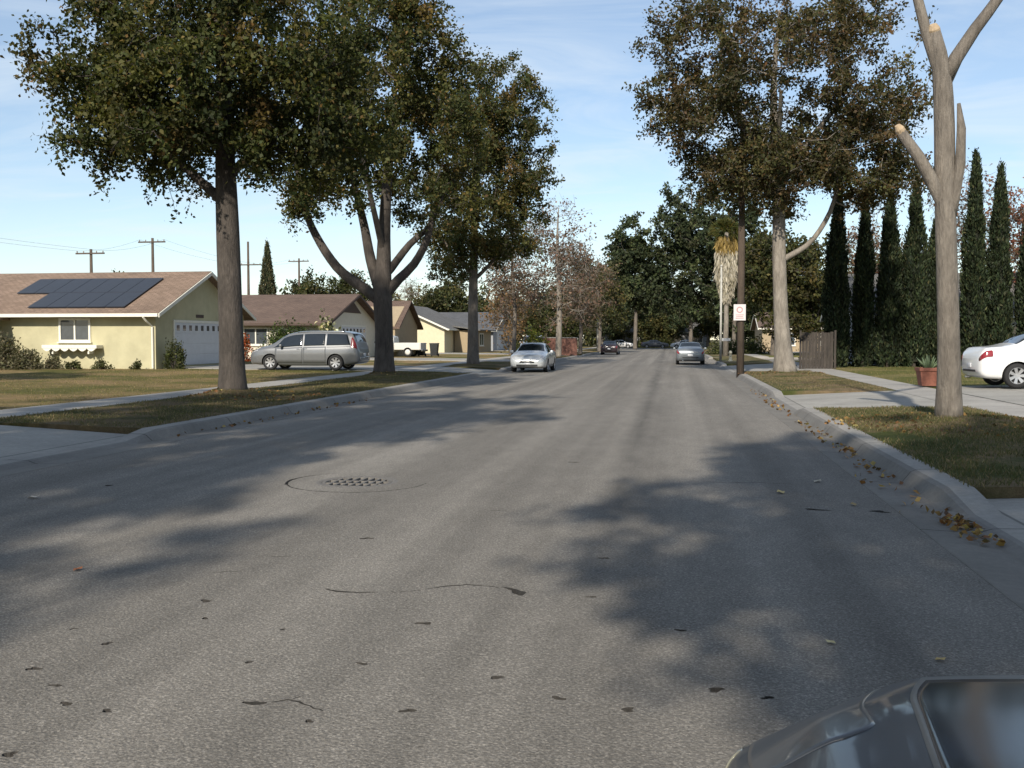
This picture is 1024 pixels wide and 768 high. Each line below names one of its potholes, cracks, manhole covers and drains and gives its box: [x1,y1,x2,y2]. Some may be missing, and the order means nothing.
crack [326,584,526,596]
crack [242,696,323,711]
